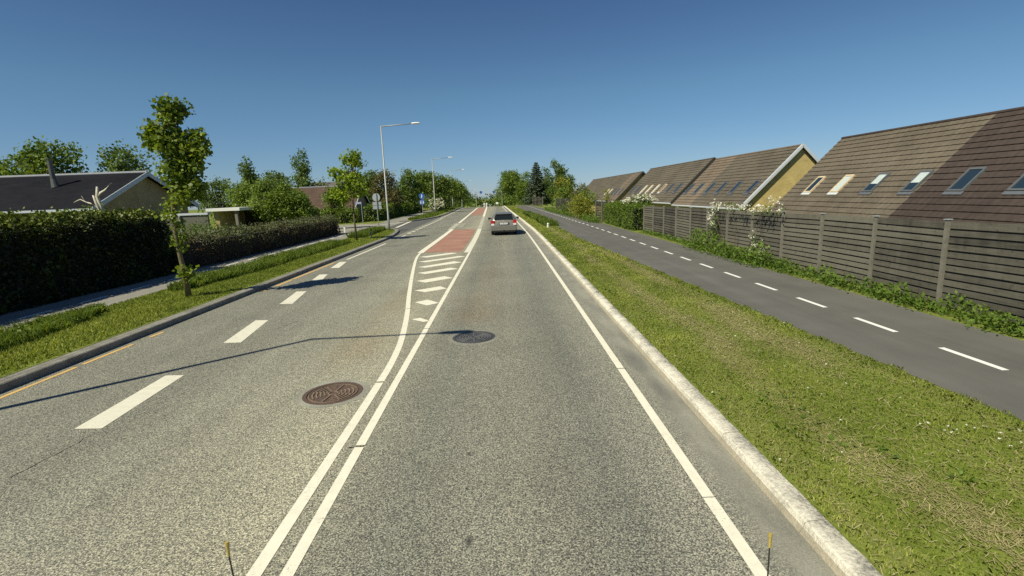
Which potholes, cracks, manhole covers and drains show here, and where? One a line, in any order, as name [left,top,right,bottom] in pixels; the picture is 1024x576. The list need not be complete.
manhole cover [448,330,500,345]
crack [11,432,93,478]
manhole cover [294,380,370,408]
